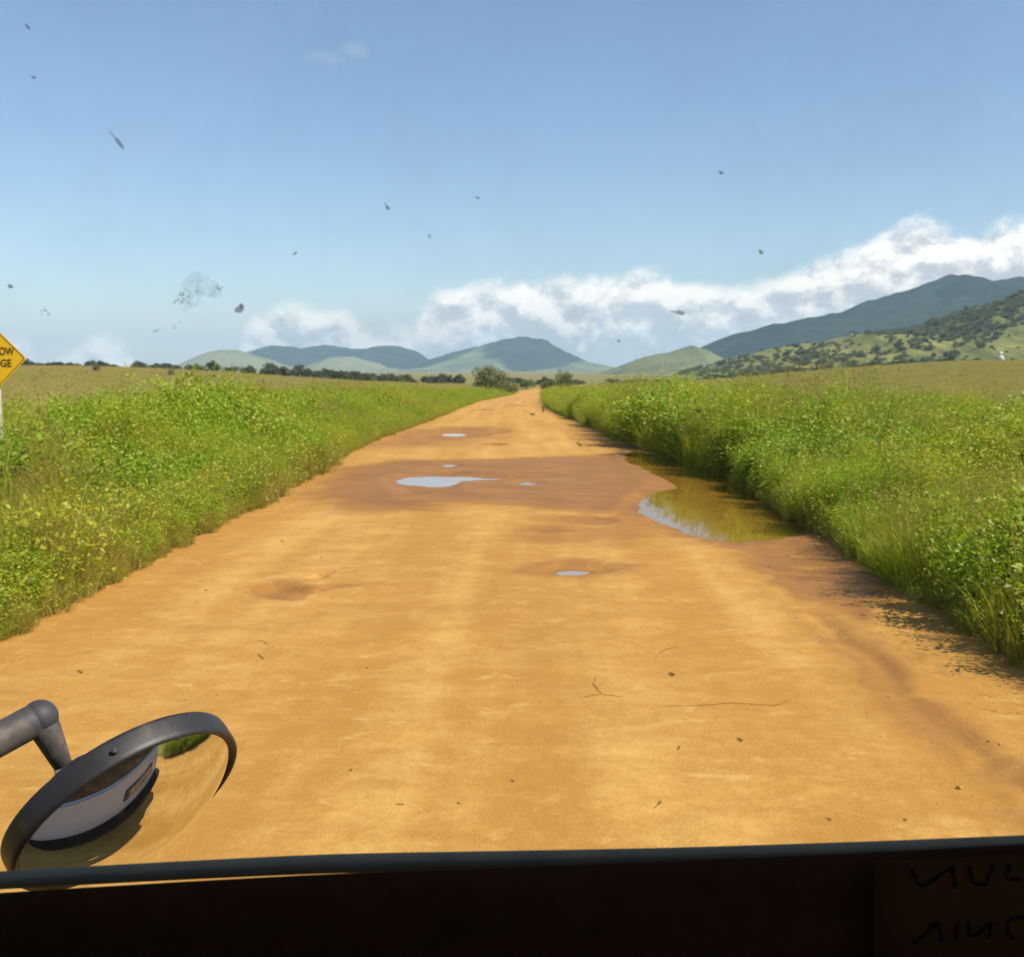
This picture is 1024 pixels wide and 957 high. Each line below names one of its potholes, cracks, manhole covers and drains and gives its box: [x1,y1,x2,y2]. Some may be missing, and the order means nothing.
pothole [242,582,352,601]
pothole [383,469,511,497]
pothole [617,450,812,543]
pothole [522,560,634,575]
